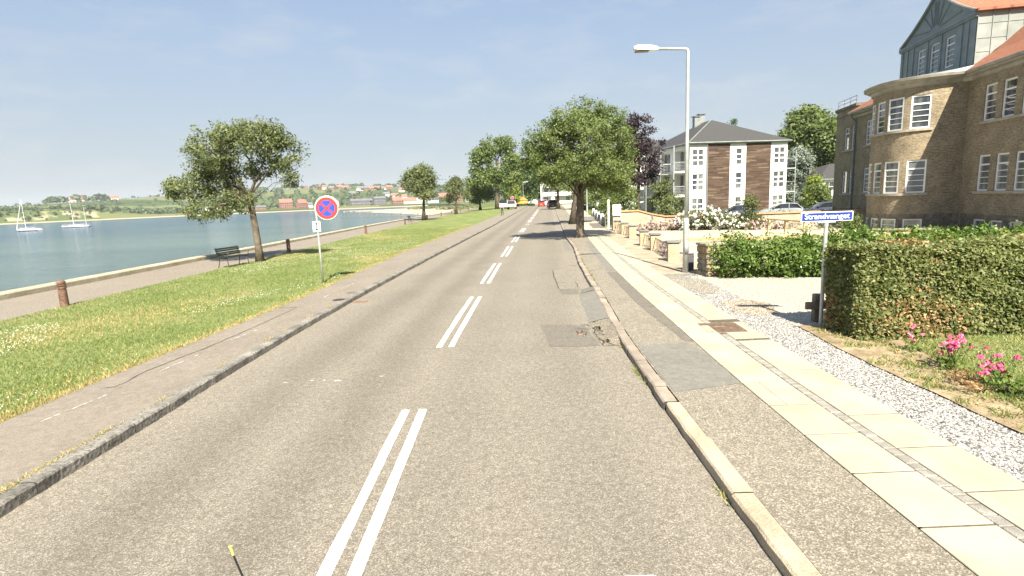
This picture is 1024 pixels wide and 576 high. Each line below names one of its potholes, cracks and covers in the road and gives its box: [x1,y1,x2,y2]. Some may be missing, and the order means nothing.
manhole cover [697,322,749,333]
crack [106,307,297,388]
